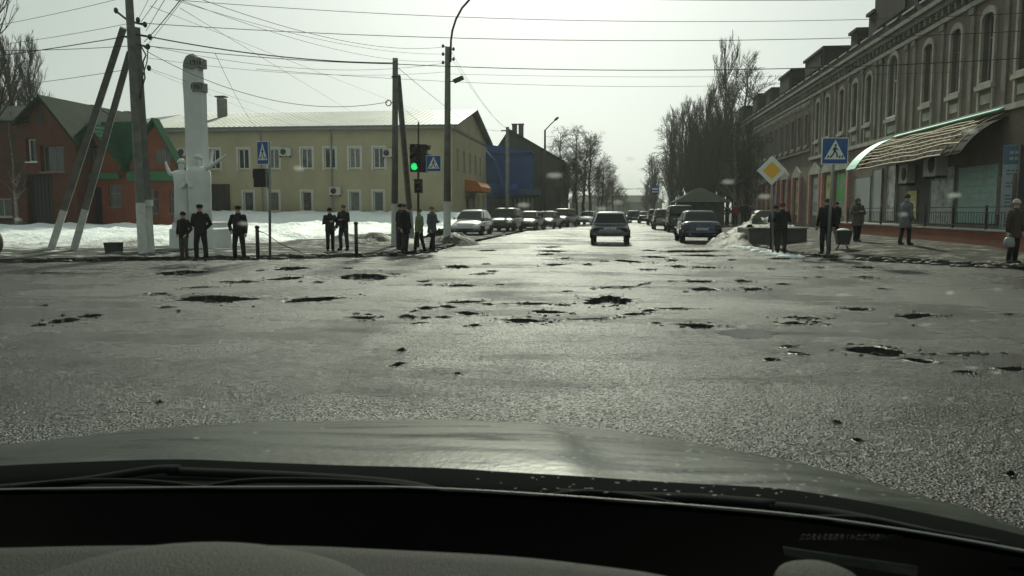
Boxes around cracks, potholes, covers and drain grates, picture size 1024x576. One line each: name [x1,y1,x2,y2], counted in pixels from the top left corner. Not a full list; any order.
pothole [271,295,358,304]
pothole [887,312,943,321]
pothole [666,322,721,330]
pothole [39,317,86,326]
pothole [575,293,644,309]
pothole [328,272,400,283]
pothole [835,345,921,359]
pothole [162,294,277,305]
pothole [494,317,558,325]
pothole [141,269,220,277]
